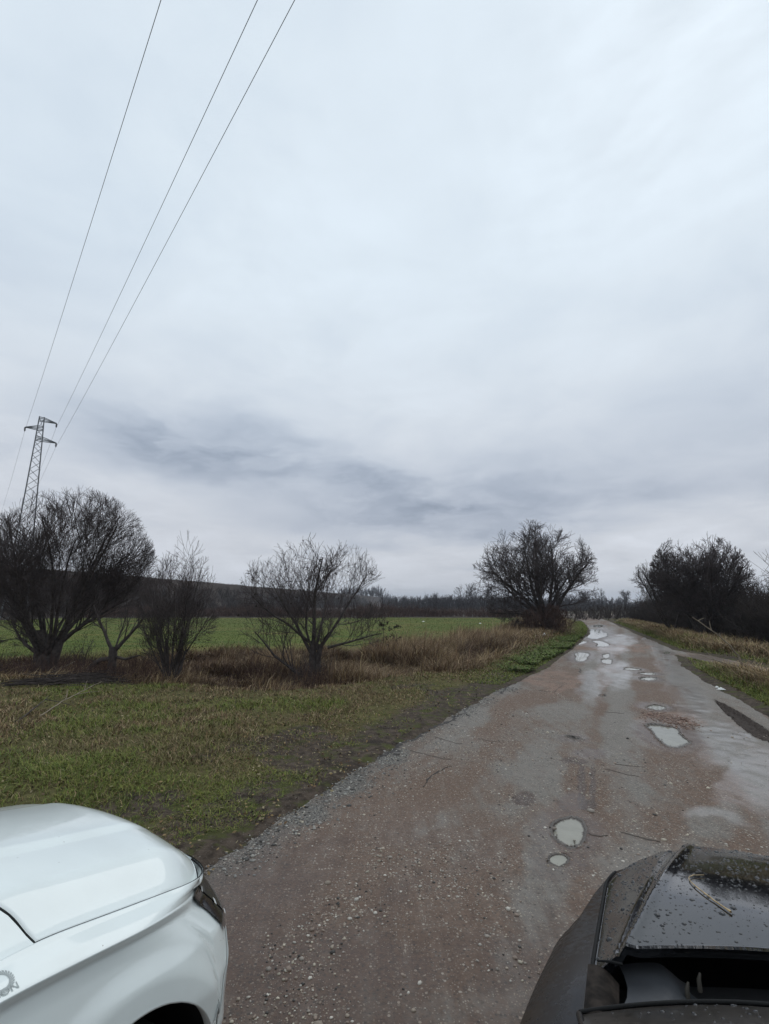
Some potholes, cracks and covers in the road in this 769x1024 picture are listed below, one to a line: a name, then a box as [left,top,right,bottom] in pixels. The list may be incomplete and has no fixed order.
pothole [586,629,608,640]
crack [589,832,660,842]
pothole [547,852,570,867]
pothole [549,815,588,849]
pothole [645,722,692,748]
pothole [574,652,590,662]
